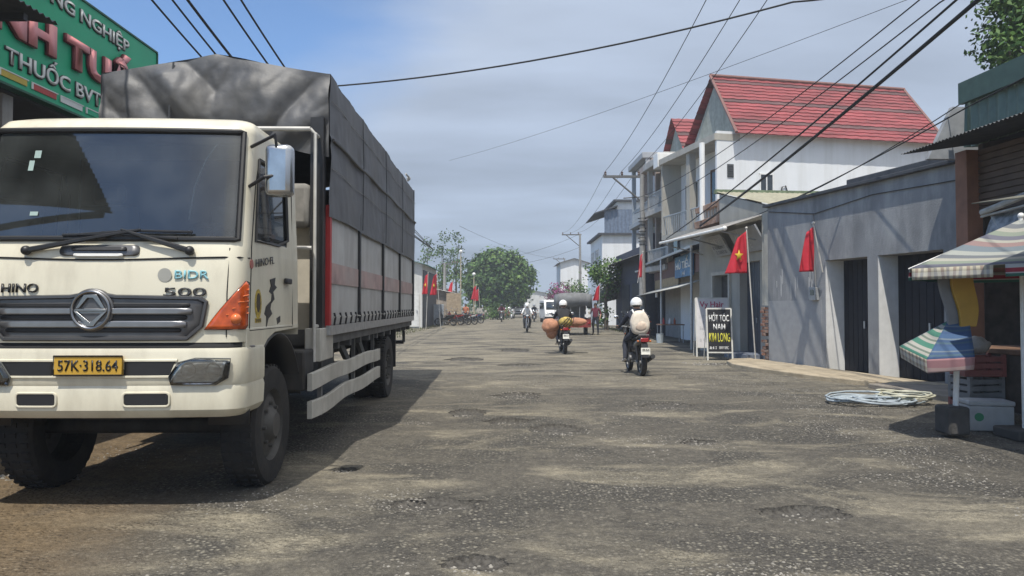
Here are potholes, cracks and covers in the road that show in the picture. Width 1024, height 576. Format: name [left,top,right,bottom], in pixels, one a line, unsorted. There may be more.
pothole [437,554,513,572]
pothole [387,496,489,511]
pothole [448,409,487,417]
pothole [755,505,854,519]
